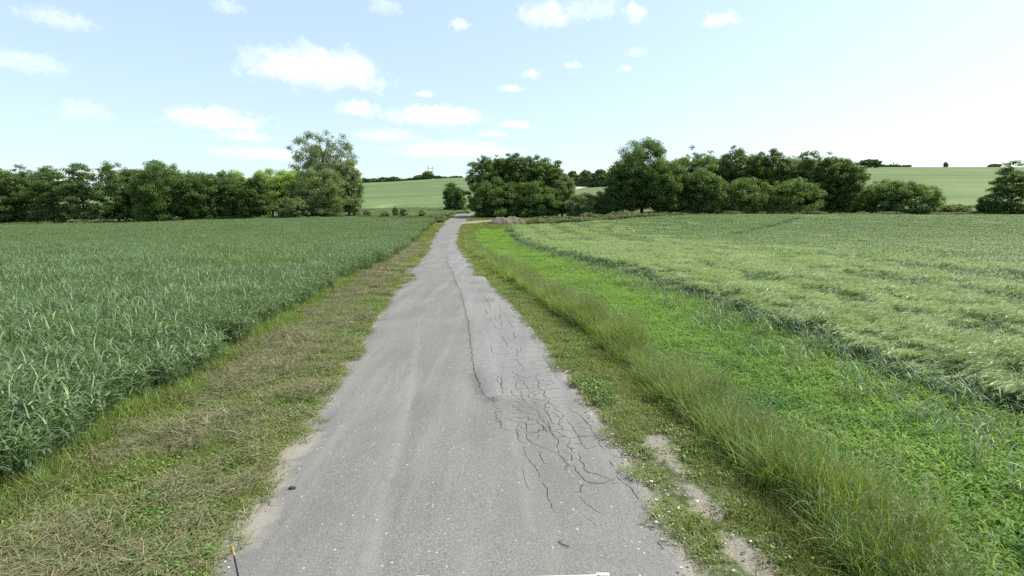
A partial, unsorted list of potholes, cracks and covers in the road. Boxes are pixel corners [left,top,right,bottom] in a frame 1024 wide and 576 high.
crack [468,283,639,526]
